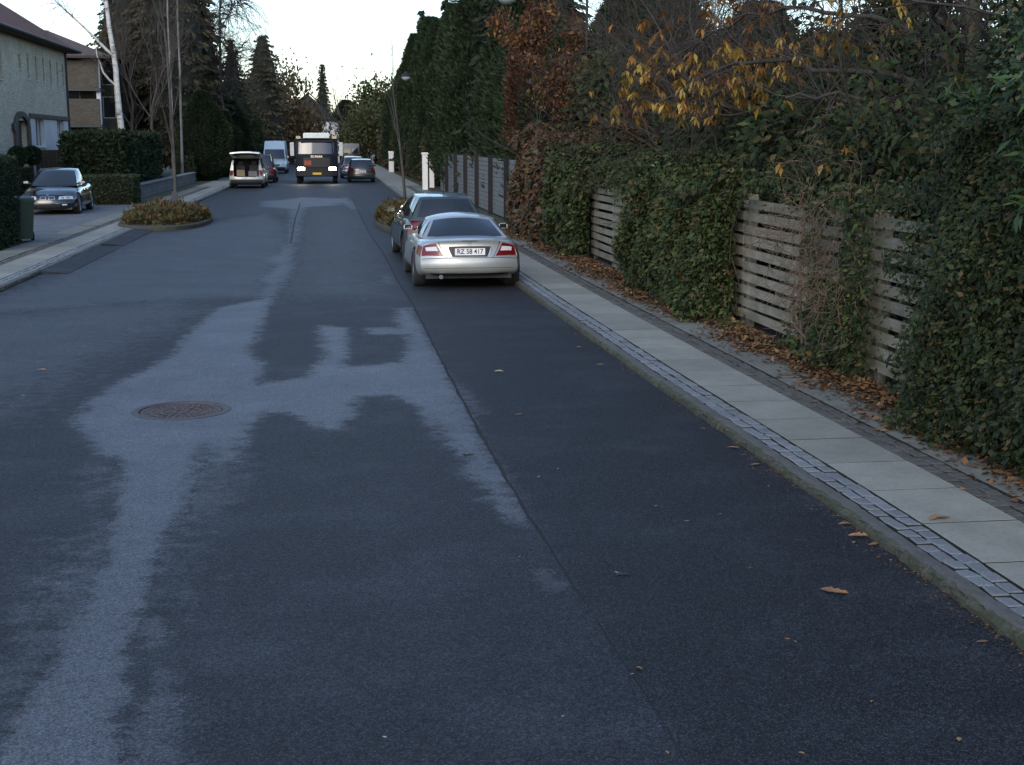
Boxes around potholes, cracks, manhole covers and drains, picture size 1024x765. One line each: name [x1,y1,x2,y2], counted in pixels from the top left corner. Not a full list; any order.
manhole cover [130,401,231,420]
